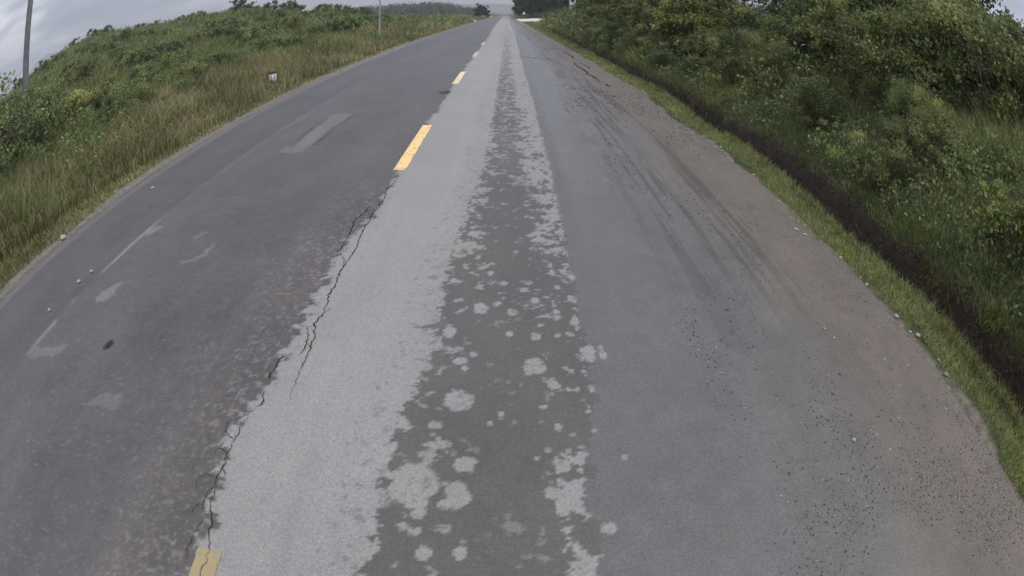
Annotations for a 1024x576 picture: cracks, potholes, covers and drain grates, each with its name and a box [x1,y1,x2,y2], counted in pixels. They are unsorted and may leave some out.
crack [290,176,398,397]
crack [563,51,610,87]
crack [186,411,250,576]
